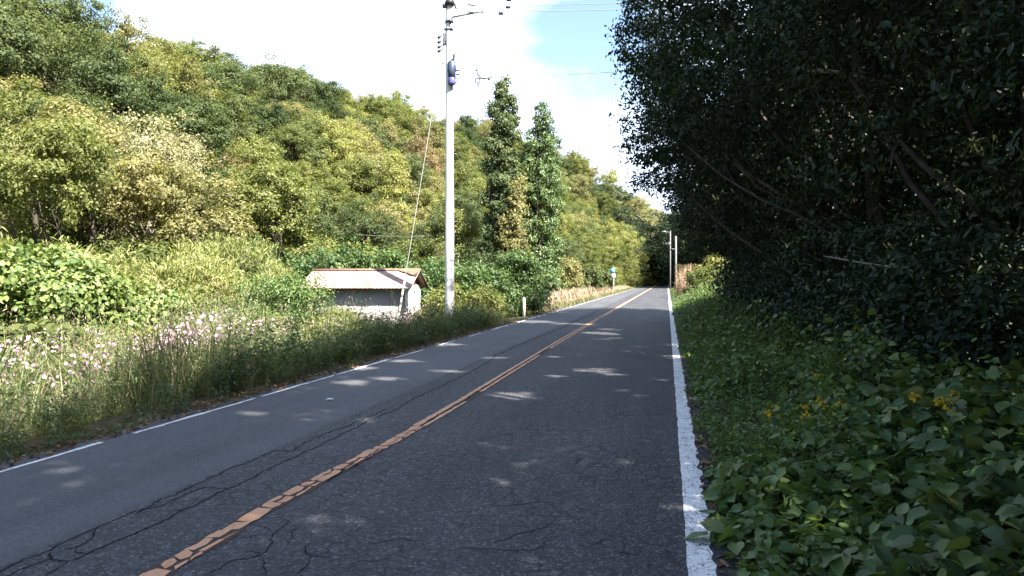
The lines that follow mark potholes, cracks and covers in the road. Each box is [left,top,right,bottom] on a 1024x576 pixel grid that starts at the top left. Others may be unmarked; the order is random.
crack [1,313,595,576]
